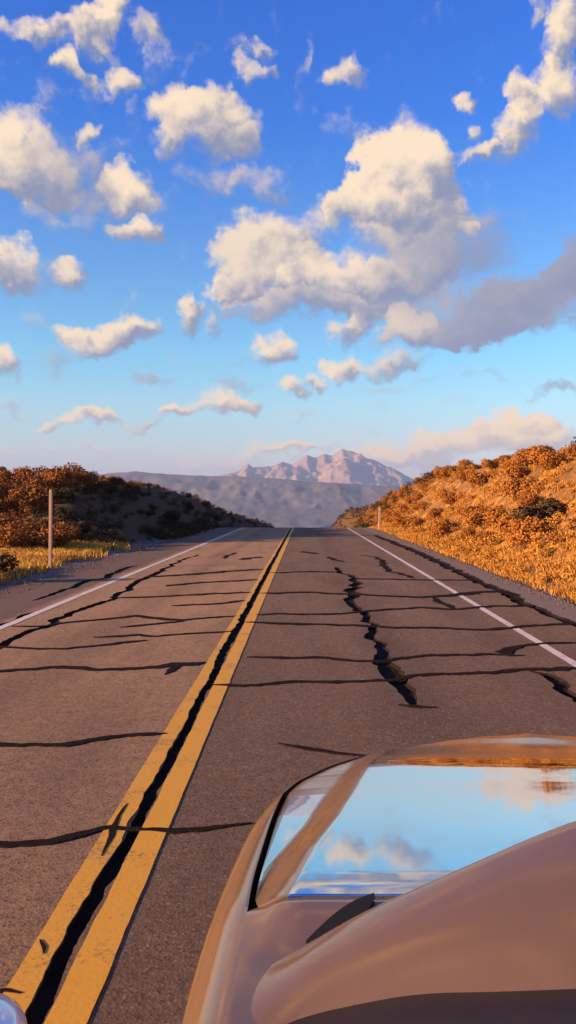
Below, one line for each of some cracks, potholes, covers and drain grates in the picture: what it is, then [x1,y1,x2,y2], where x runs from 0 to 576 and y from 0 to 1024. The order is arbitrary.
crack [0,535,576,708]
crack [0,803,252,856]
crack [0,732,167,747]
